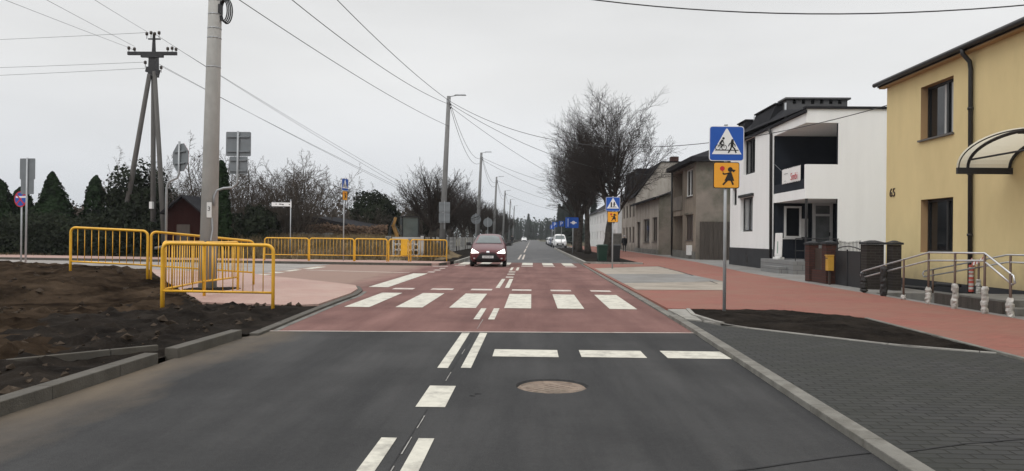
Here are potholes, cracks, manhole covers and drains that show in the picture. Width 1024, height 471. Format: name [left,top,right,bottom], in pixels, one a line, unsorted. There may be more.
manhole cover [516,379,589,393]
